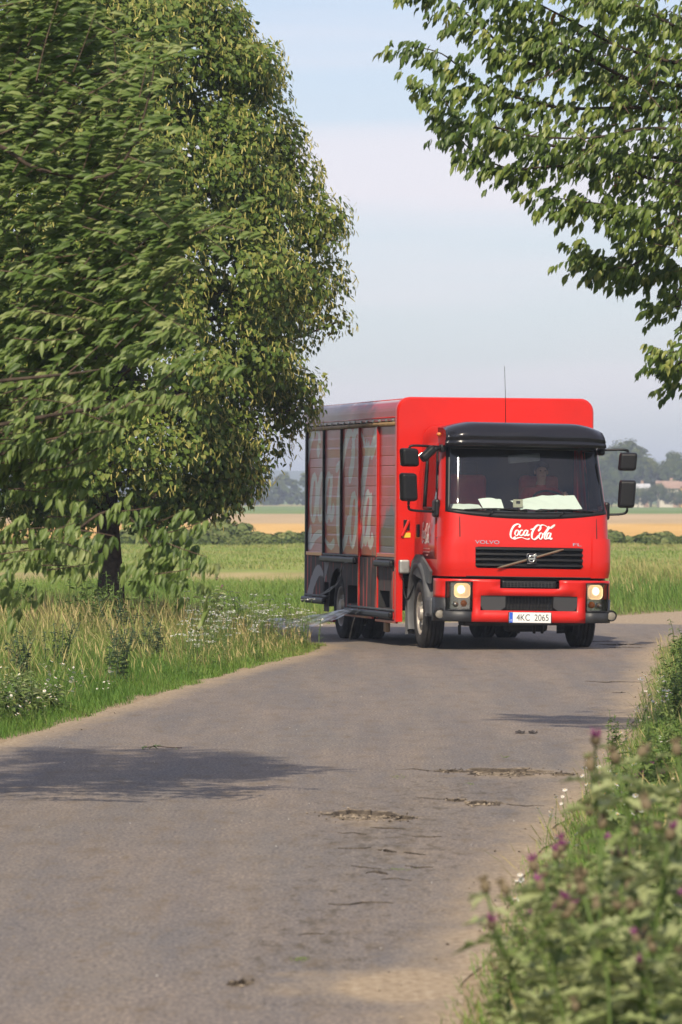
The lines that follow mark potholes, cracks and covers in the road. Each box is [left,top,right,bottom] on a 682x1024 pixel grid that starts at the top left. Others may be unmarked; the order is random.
pothole [306,806,420,822]
pothole [226,978,254,987]
crack [338,827,442,881]
pothole [443,797,504,807]
pothole [427,767,578,778]
